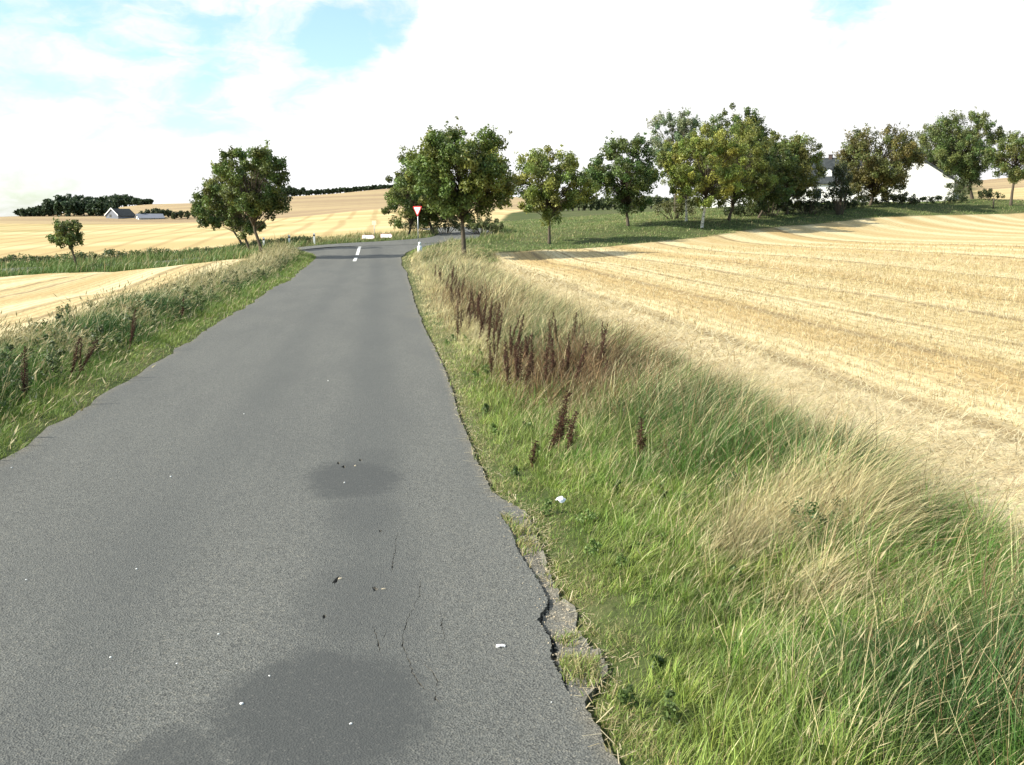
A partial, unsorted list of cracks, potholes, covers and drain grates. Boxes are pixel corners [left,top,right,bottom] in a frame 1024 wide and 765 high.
crack [374,579,439,702]
